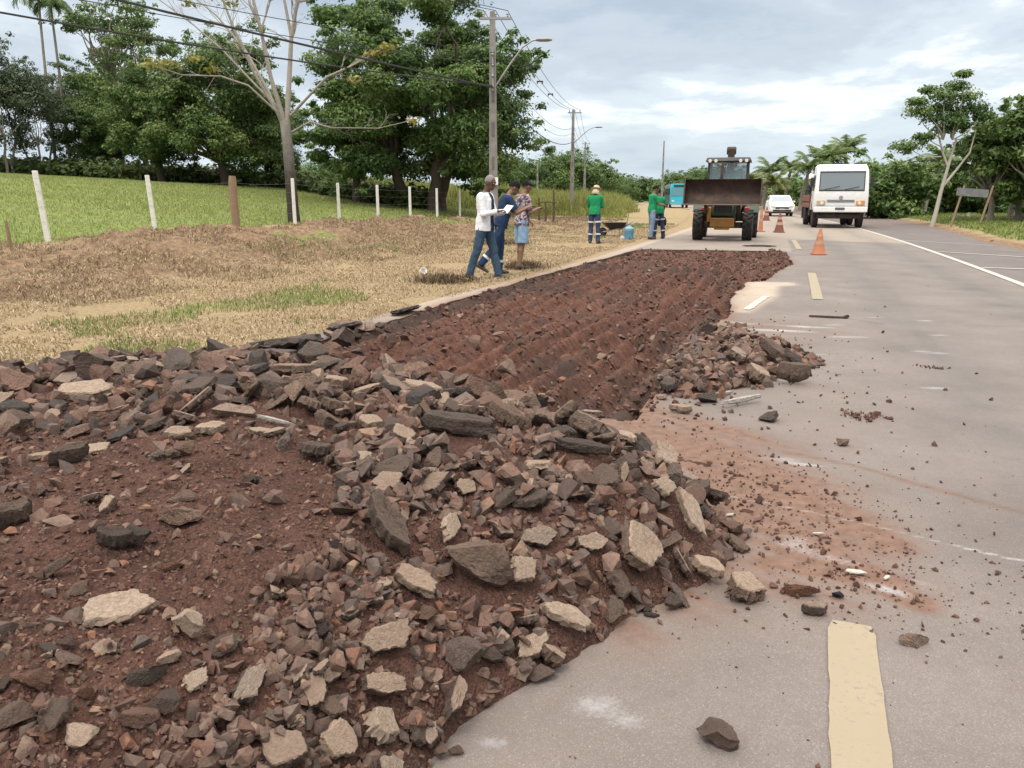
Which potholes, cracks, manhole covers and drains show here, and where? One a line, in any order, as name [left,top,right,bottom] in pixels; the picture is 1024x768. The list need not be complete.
pothole [295,249,792,422]
